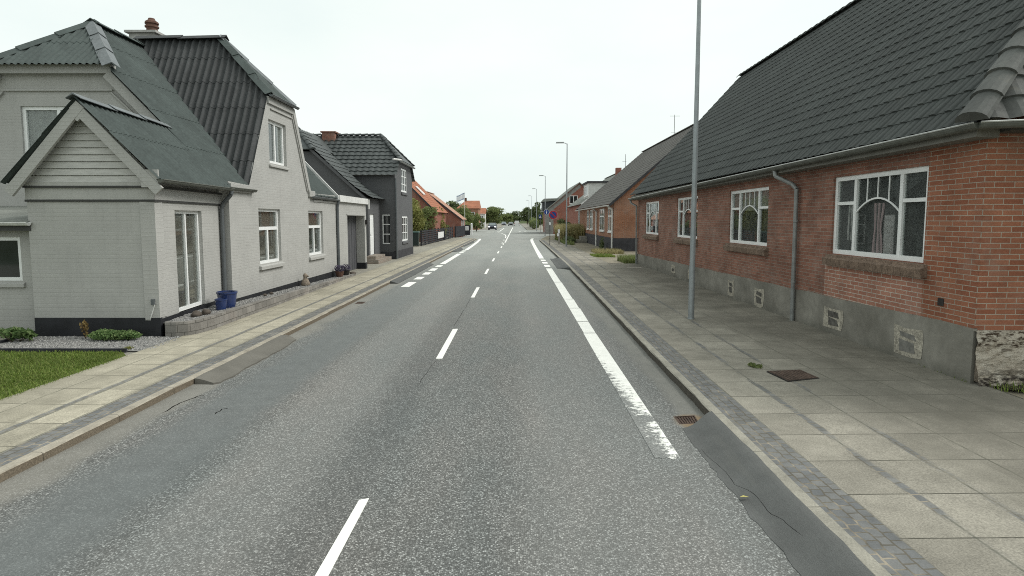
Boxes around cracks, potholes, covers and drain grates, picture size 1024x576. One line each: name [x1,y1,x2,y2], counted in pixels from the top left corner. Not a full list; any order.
crack [702,450,801,535]
utility cover [767,370,819,382]
drain grate [673,415,698,424]
